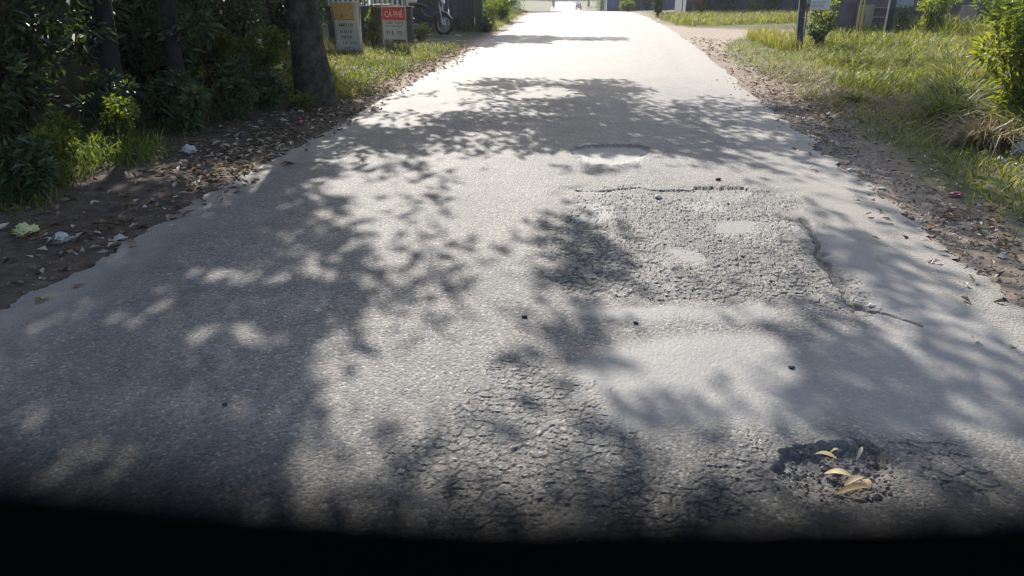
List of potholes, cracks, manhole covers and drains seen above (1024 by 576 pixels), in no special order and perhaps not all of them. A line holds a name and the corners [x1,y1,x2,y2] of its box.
pothole [567,143,651,166]
crack [533,183,925,328]
crack [883,438,999,481]
pothole [768,435,908,484]
crack [382,355,776,487]
